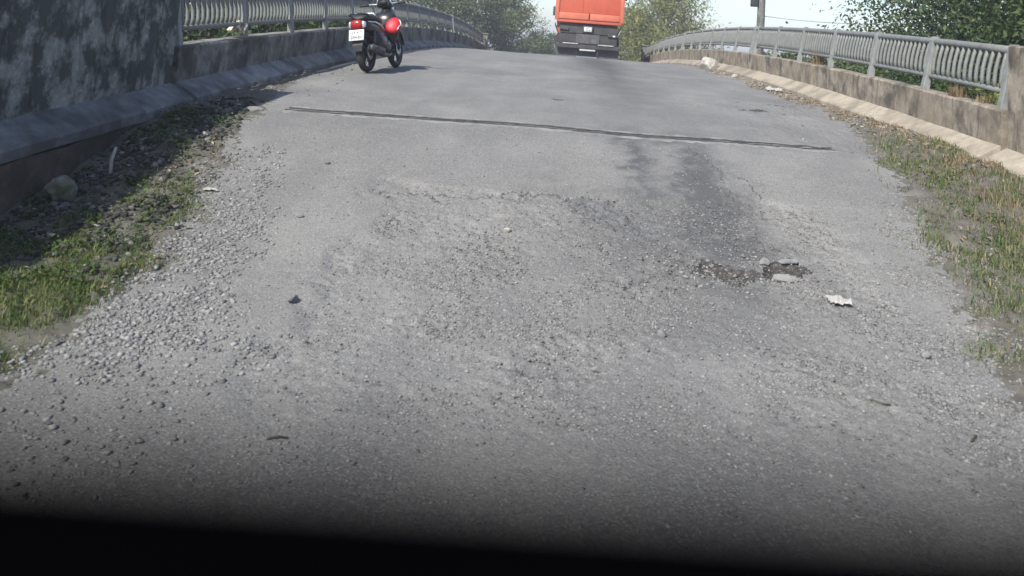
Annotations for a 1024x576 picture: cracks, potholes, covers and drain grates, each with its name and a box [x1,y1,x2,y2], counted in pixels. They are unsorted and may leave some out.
pothole [761,261,813,283]
pothole [690,258,764,288]
